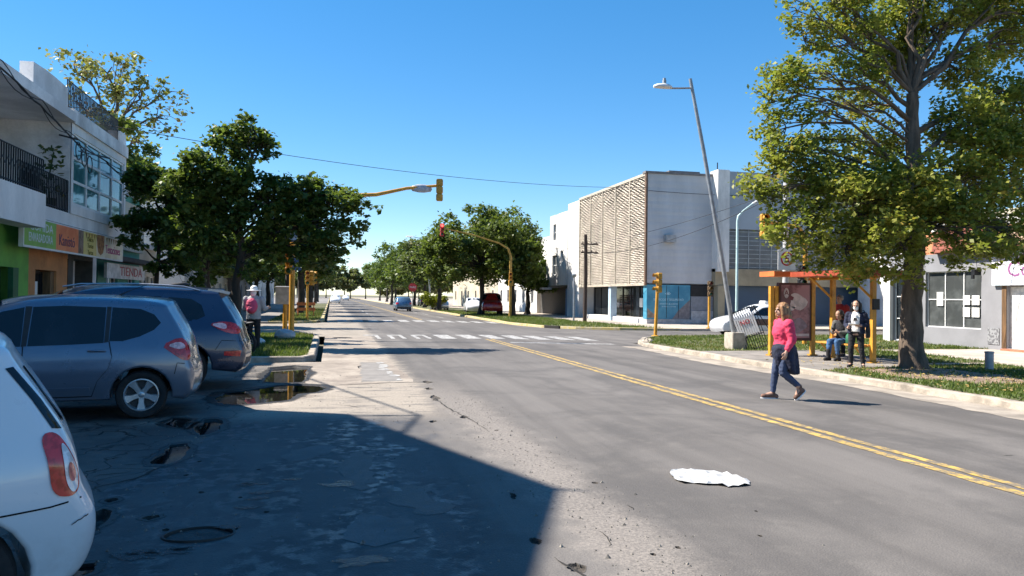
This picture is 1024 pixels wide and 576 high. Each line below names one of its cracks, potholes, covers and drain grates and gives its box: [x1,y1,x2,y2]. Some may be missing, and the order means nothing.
pothole [203,383,335,406]
pothole [136,513,166,522]
manhole cover [160,526,236,543]
pothole [257,365,316,384]
pothole [183,417,230,437]
pothole [94,506,120,535]
crack [83,456,168,488]
pothole [156,417,200,429]
pothole [142,441,198,467]
